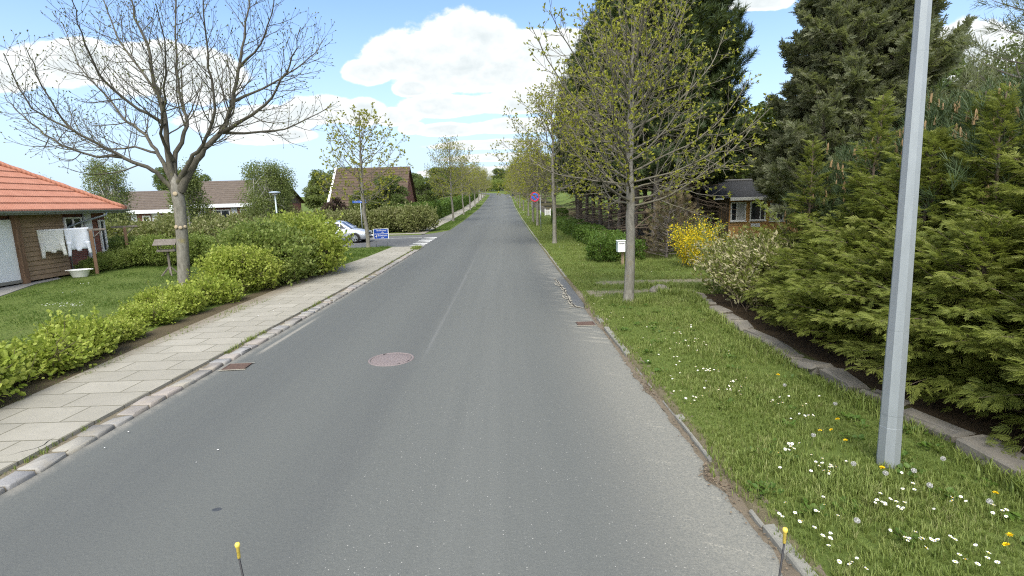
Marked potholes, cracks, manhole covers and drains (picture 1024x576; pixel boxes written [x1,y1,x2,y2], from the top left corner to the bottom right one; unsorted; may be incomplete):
manhole cover [368,352,414,366]
drain grate [218,362,255,371]
